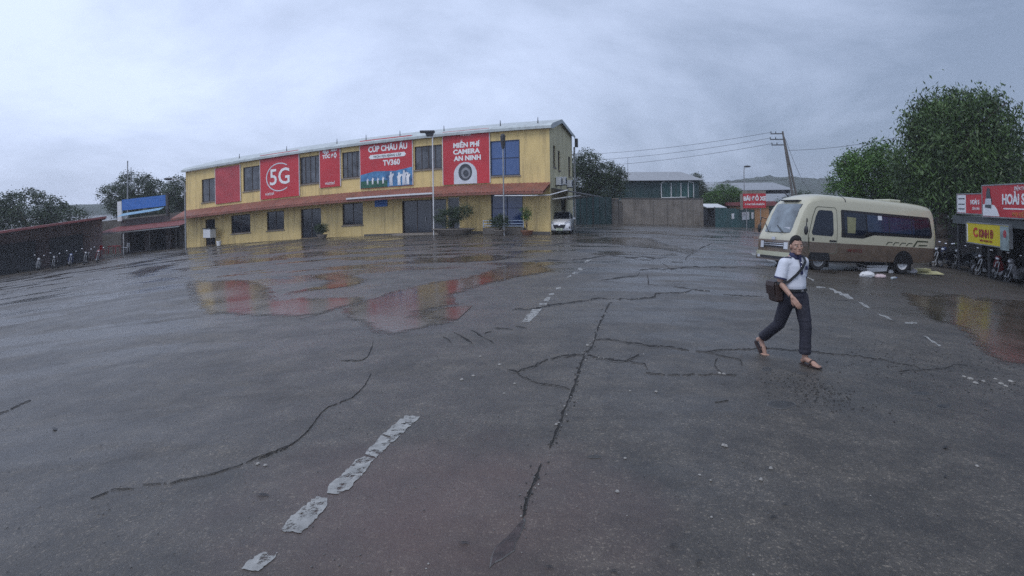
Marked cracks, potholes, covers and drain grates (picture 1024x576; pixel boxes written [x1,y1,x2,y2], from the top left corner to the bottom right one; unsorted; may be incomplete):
crack [444,242,968,518]
crack [91,343,373,499]
